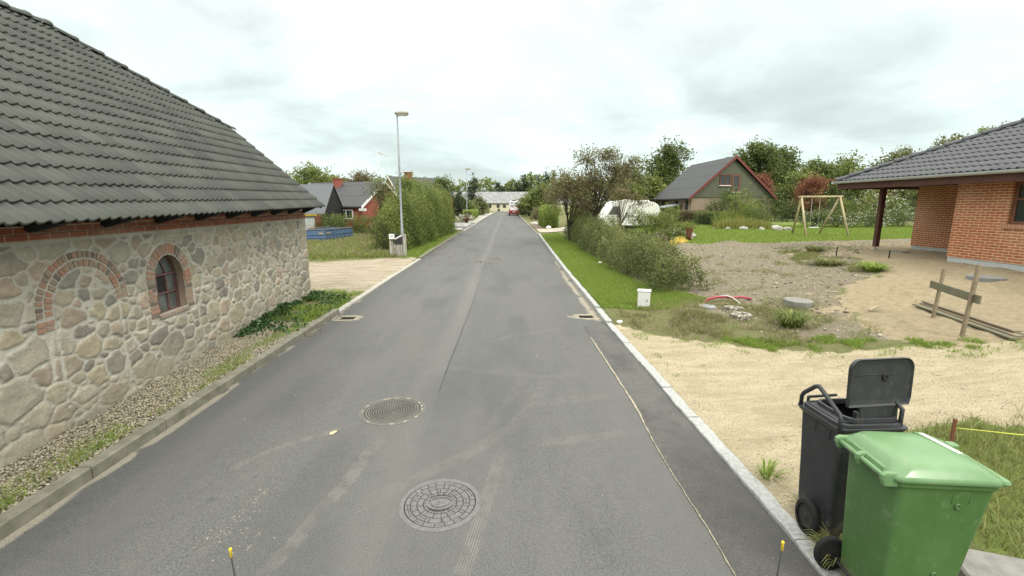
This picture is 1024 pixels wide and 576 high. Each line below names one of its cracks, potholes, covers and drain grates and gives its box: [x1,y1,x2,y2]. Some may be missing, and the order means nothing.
manhole cover [359,397,425,426]
manhole cover [398,479,481,532]
